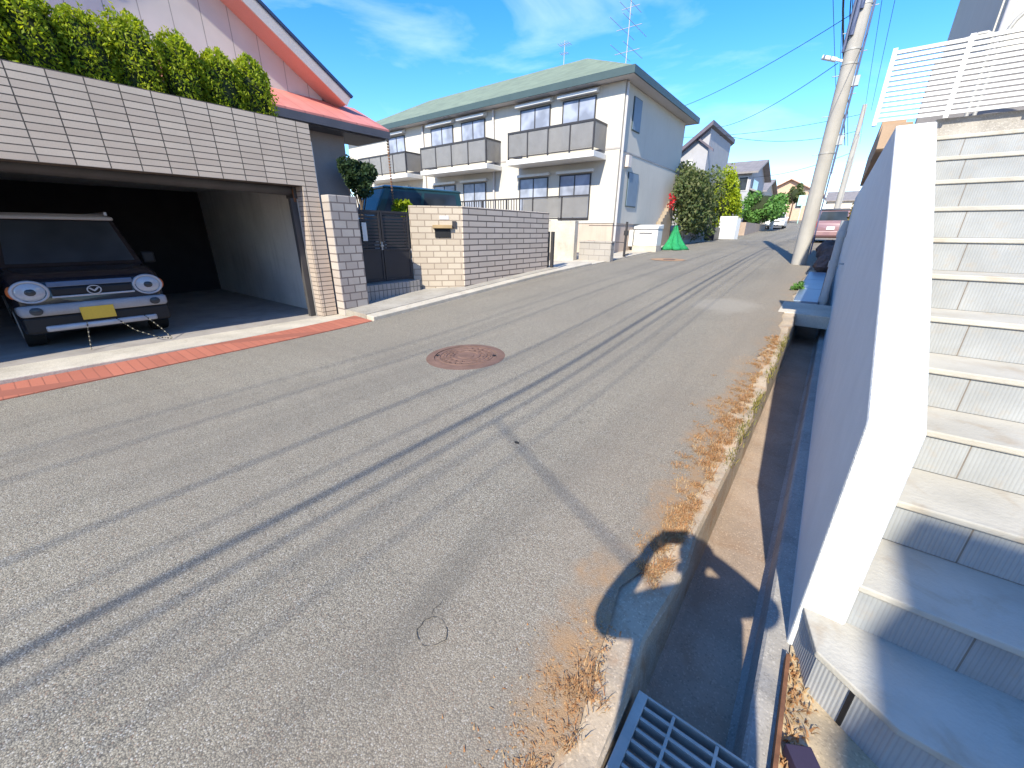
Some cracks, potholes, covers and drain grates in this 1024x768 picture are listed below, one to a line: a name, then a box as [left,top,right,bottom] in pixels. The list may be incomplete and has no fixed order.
drain grate [606,690,753,768]
manhole cover [426,344,505,370]
crack [416,601,448,646]
